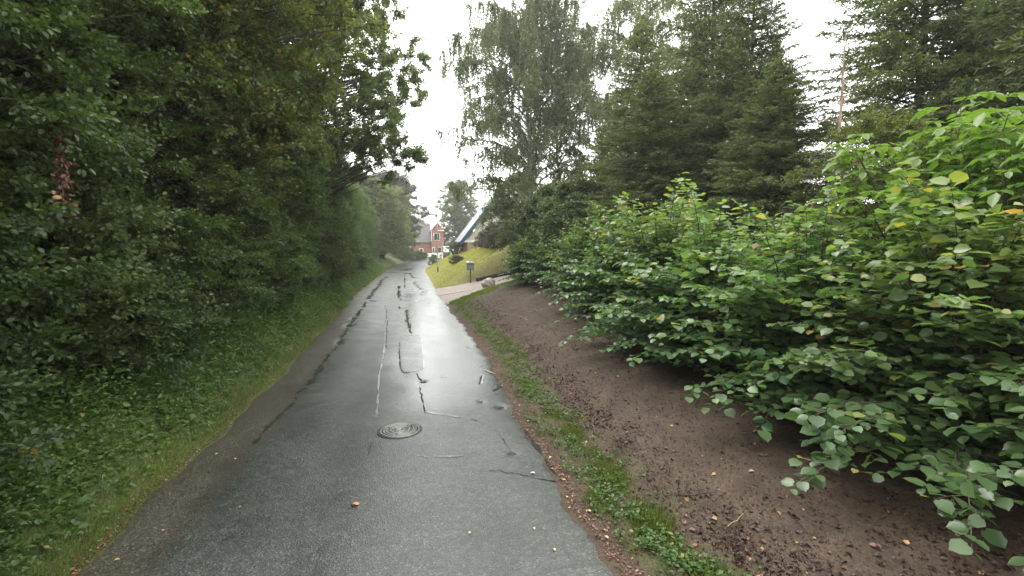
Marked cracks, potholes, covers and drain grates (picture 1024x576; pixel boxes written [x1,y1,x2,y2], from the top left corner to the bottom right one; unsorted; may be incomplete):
manhole cover [377,422,422,439]
crack [251,268,426,446]
crack [472,419,560,482]
